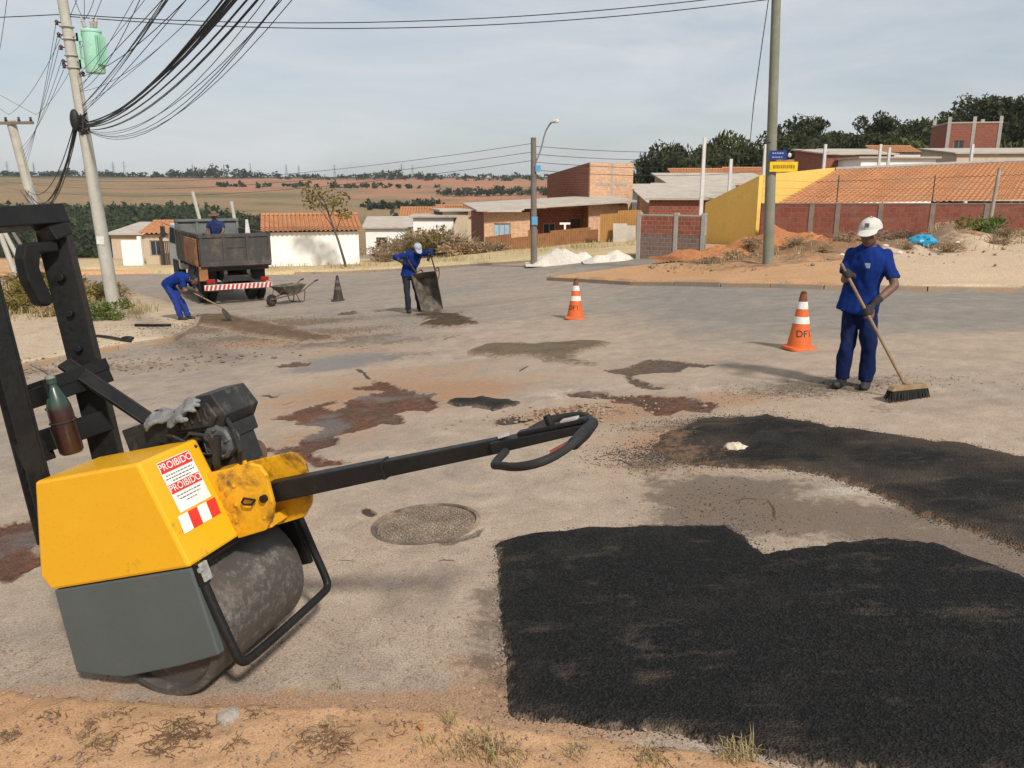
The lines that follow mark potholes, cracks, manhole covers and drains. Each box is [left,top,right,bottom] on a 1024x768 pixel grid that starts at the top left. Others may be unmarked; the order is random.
manhole cover [371,503,482,546]
